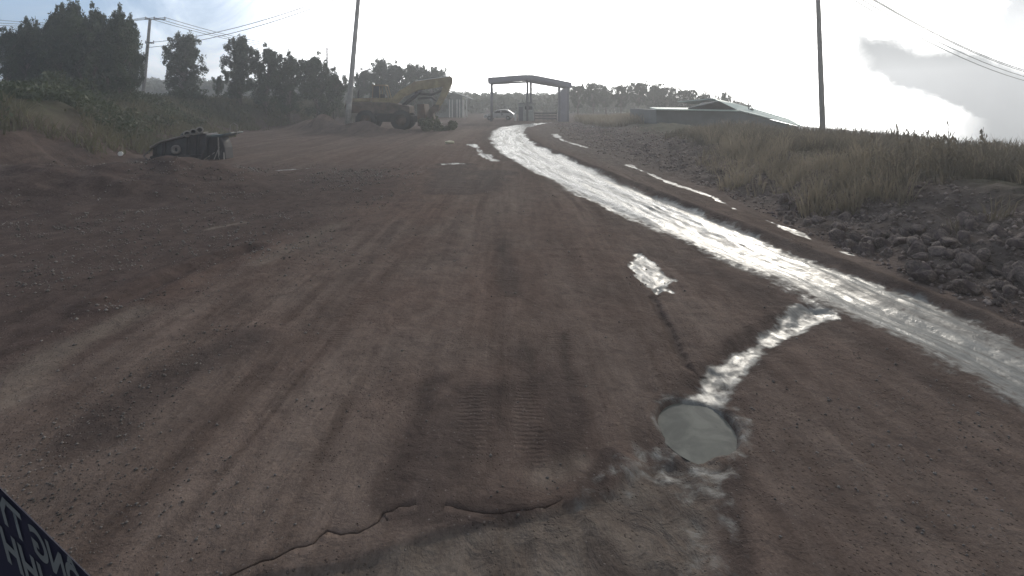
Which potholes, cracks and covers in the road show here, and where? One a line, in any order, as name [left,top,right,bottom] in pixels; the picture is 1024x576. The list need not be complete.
crack [442,492,570,529]
crack [205,496,418,576]
crack [643,286,708,378]
pothole [640,387,755,475]
